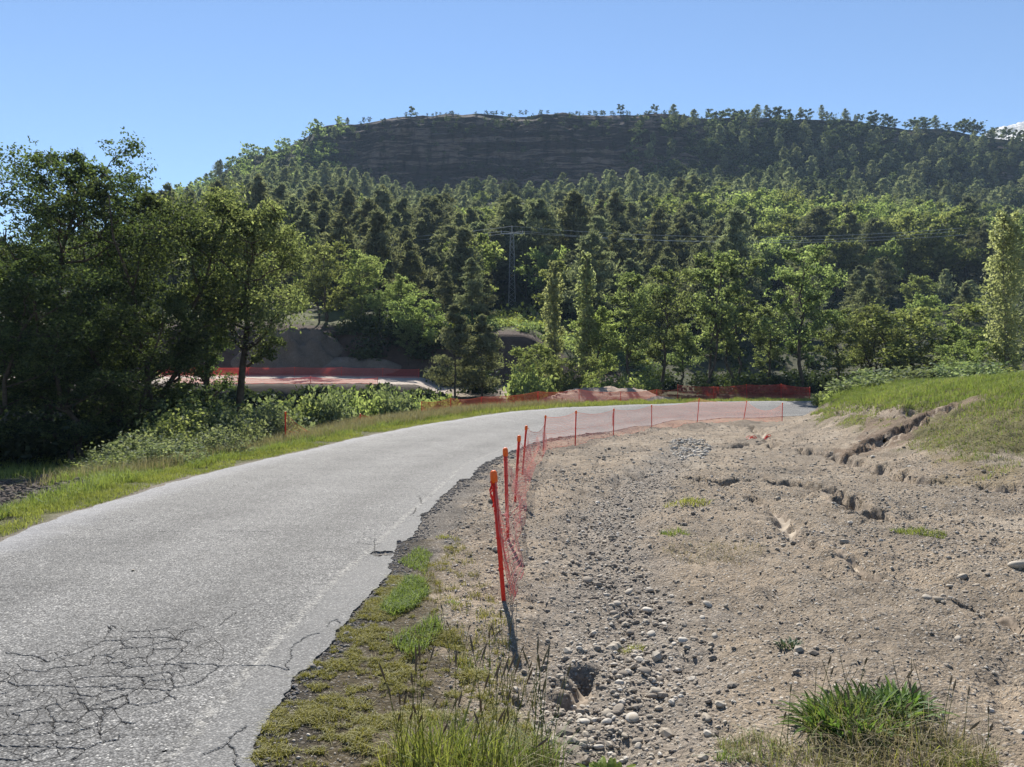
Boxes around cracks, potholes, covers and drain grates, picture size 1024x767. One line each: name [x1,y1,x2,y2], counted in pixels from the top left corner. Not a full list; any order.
crack [0,613,283,762]
